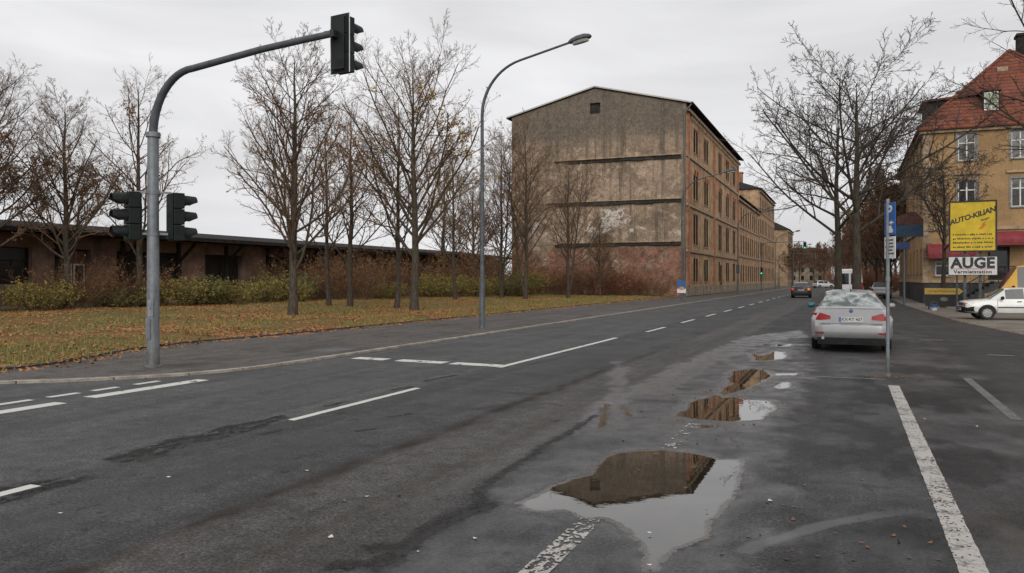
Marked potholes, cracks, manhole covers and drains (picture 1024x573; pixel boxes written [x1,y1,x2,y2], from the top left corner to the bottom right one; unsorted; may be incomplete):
pothole [513,449,746,573]
